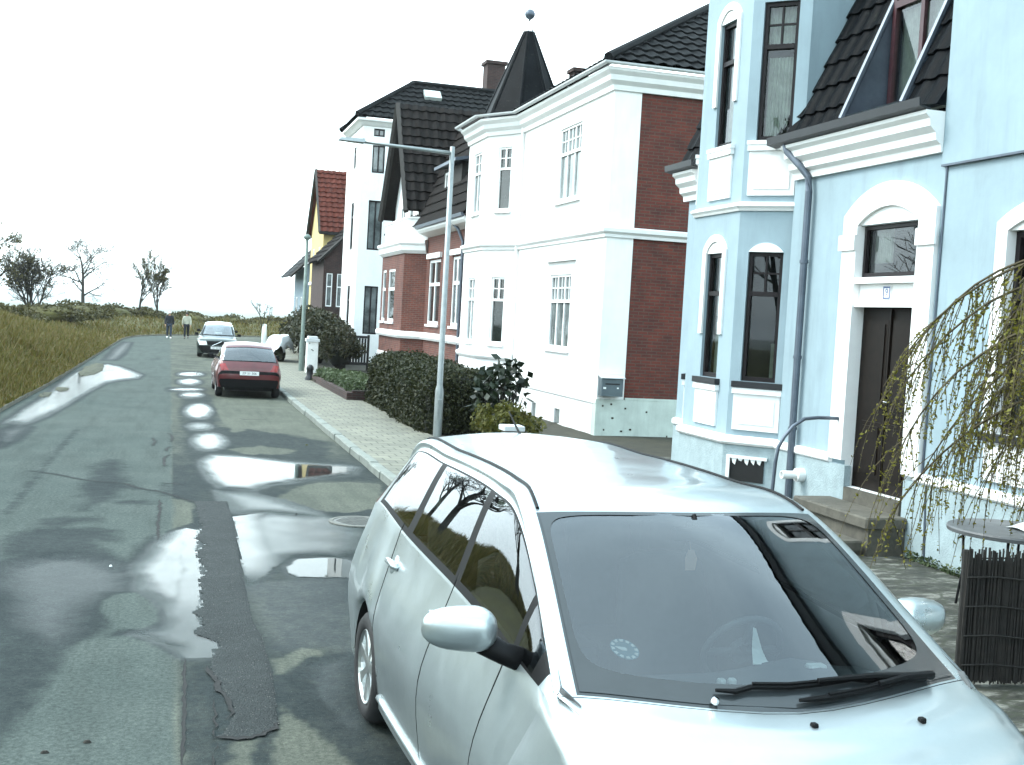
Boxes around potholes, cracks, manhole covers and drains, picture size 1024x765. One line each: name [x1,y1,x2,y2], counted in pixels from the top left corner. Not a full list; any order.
crack [152,433,174,466]
crack [36,471,195,539]
manhole cover [329,516,369,528]
